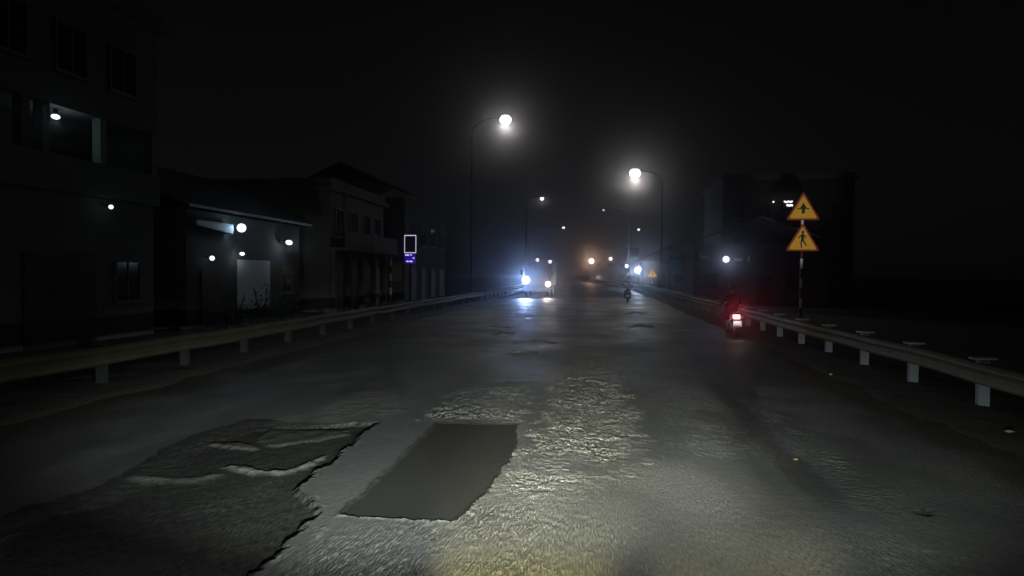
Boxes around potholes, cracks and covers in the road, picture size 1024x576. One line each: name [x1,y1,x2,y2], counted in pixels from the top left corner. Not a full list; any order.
pothole [0,419,380,576]
pothole [911,509,938,518]
